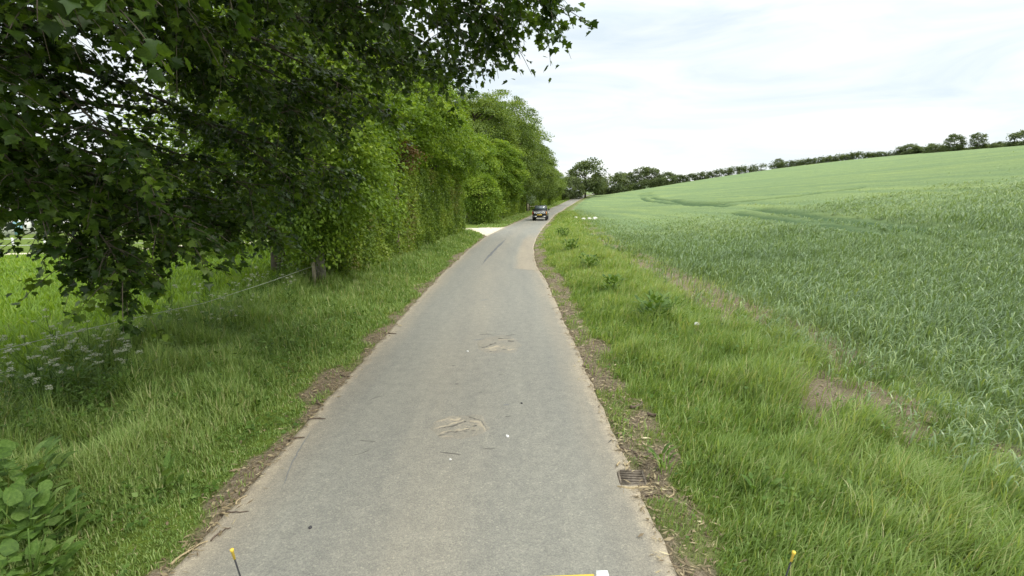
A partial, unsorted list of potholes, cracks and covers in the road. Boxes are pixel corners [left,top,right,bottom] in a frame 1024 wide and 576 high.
pothole [477,335,522,353]
pothole [430,415,489,440]
